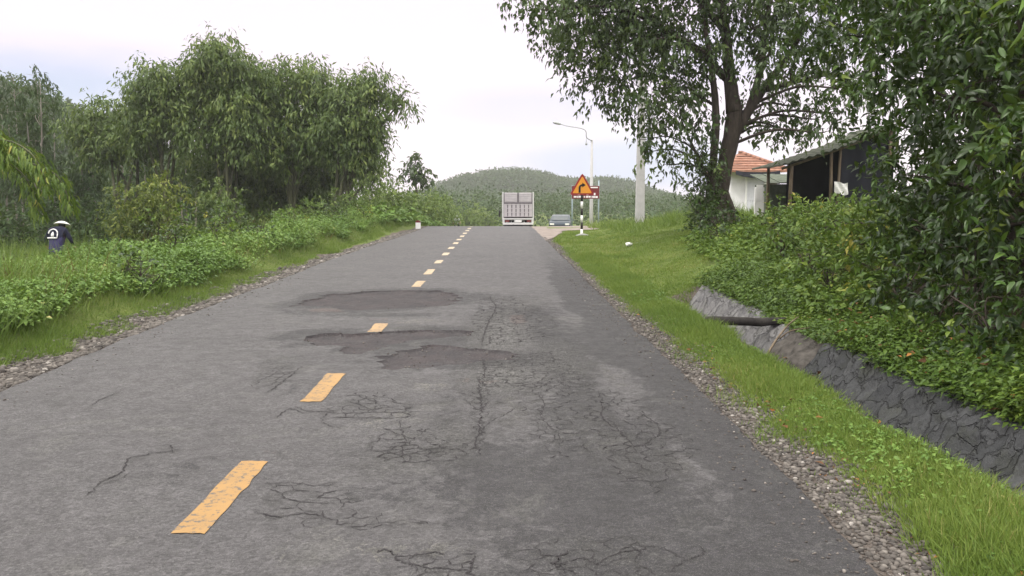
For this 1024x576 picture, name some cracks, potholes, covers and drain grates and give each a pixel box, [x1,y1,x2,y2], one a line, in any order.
crack [377,548,480,576]
crack [256,482,435,530]
crack [458,296,596,457]
crack [85,444,177,496]
crack [517,536,706,576]
crack [276,391,468,463]
pothole [375,344,520,370]
crack [251,366,302,390]
crack [580,388,700,493]
